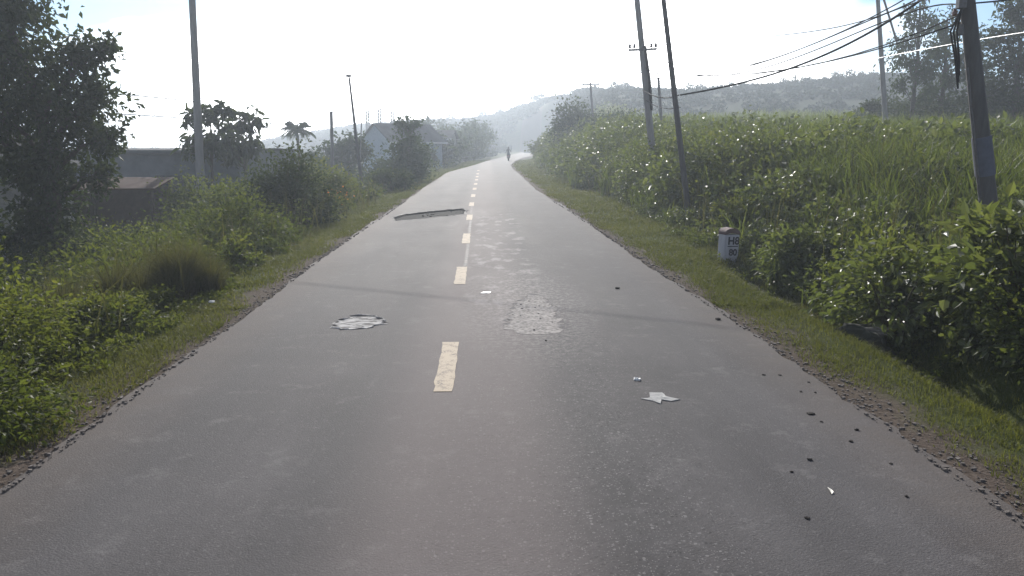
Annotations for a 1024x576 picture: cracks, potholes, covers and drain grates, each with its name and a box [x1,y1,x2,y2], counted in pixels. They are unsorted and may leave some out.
pothole [330,314,389,330]
pothole [391,208,468,221]
